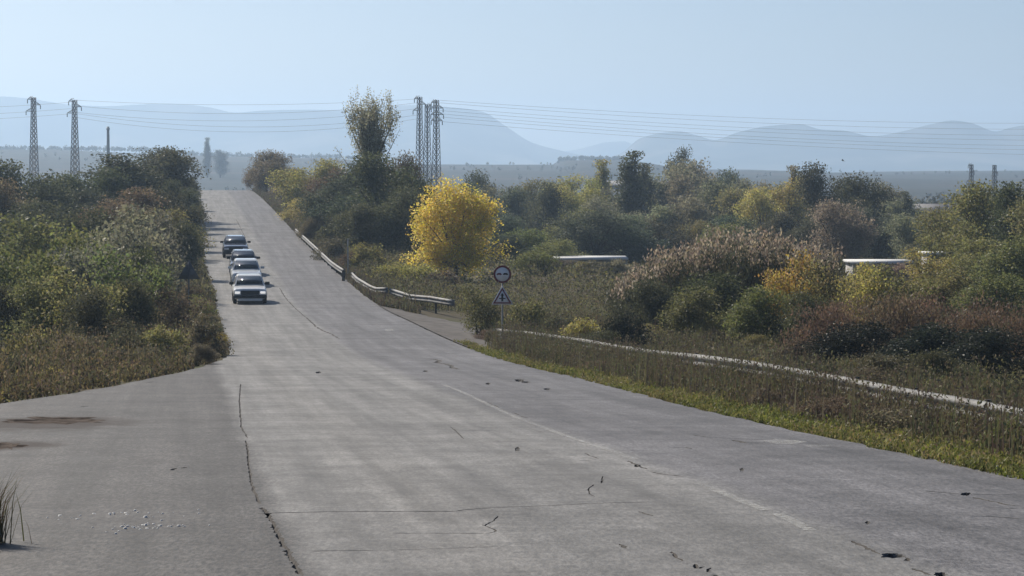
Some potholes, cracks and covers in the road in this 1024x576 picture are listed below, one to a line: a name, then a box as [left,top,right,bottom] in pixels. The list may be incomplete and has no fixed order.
crack [279,288,338,338]
crack [622,450,678,476]
crack [433,353,467,370]
crack [851,541,931,575]
crack [263,476,653,551]
